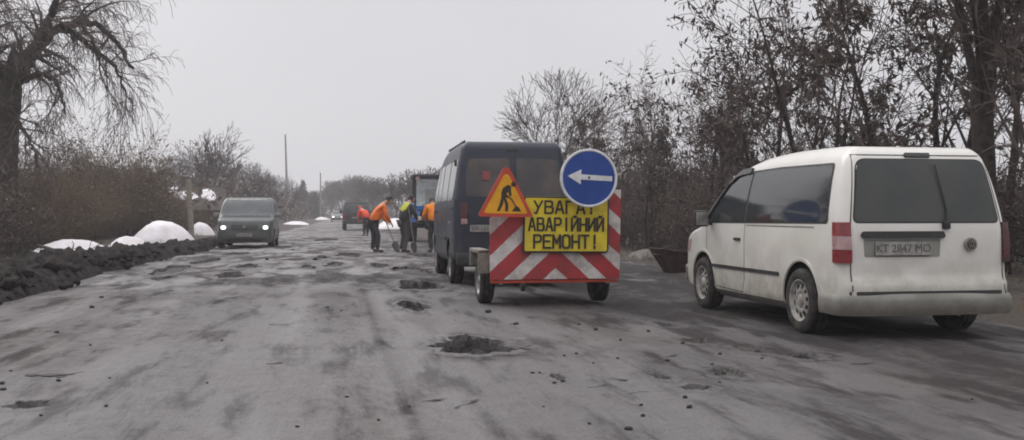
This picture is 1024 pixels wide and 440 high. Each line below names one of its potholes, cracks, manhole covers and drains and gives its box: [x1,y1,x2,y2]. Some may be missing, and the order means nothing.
pothole [386,300,445,313]
pothole [774,352,833,362]
pothole [695,367,759,380]
pothole [387,279,456,291]
pothole [0,399,64,413]
pothole [143,265,196,277]
pothole [415,334,527,357]
pothole [202,271,256,280]
pothole [181,257,231,265]
pothole [666,382,727,393]
pothole [637,372,682,382]
